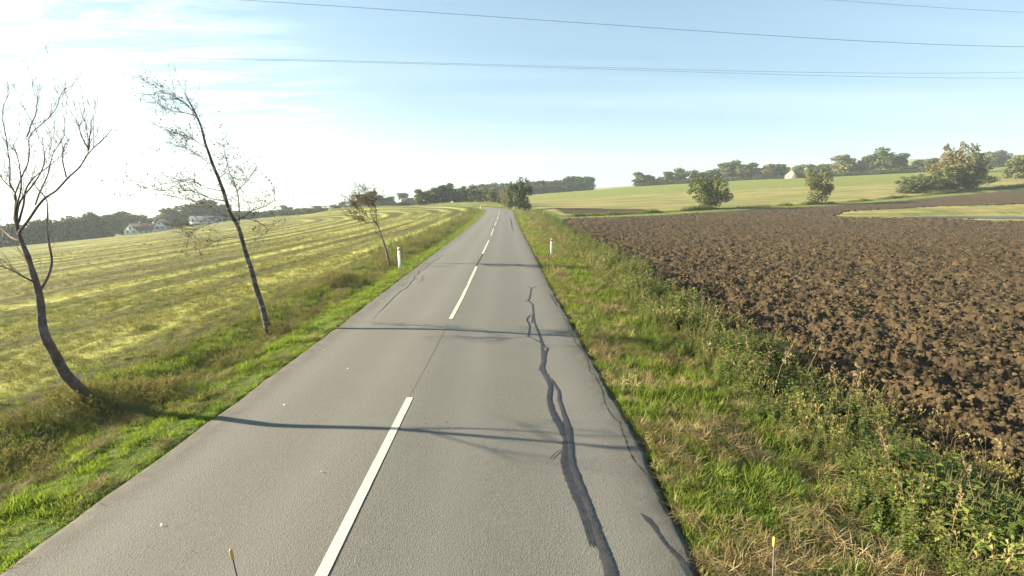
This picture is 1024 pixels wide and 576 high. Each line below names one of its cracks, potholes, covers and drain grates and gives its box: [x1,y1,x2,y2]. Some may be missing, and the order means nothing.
crack [549,294,670,517]
